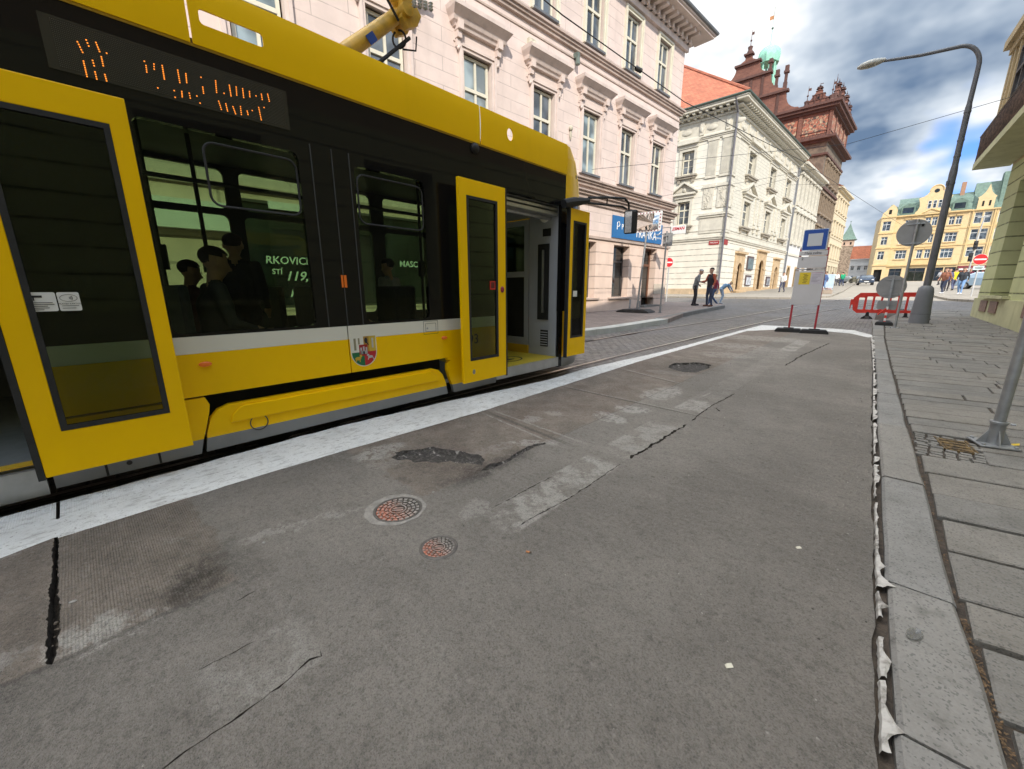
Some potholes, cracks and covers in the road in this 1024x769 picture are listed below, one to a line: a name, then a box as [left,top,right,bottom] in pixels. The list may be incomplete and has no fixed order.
manhole cover [419,536,458,560]
crack [521,394,734,525]
pothole [392,447,485,465]
manhole cover [364,494,427,526]
crack [162,641,322,769]
